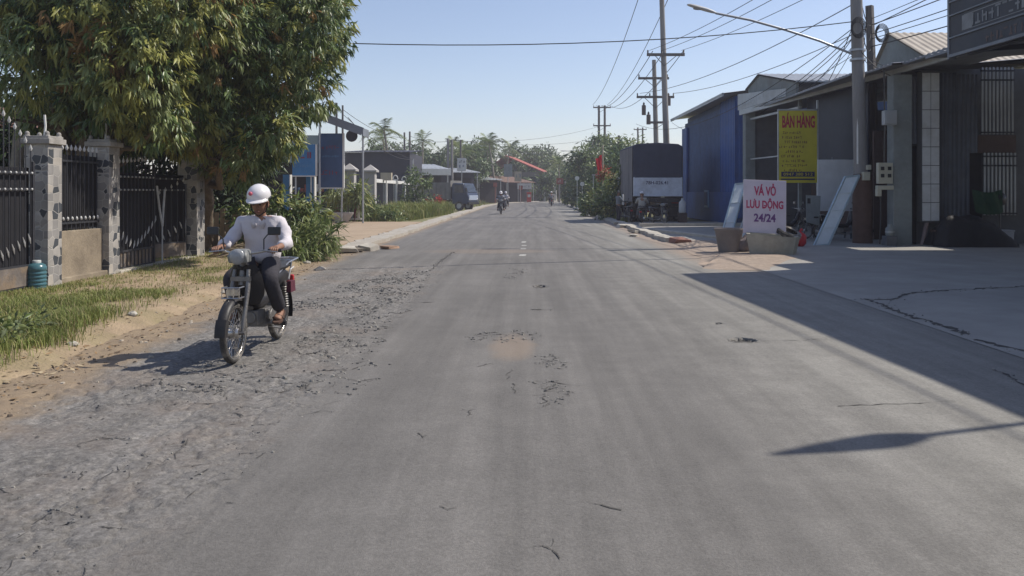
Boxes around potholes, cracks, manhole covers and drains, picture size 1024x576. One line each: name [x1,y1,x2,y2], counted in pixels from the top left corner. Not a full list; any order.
crack [854,286,1024,385]
crack [293,270,430,314]
crack [467,330,574,406]
crack [0,310,397,575]
